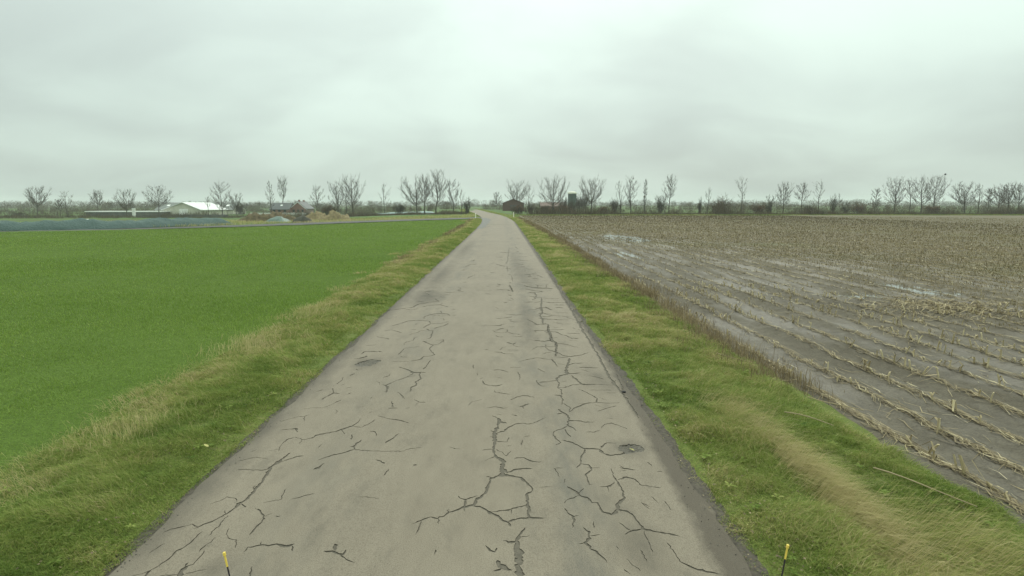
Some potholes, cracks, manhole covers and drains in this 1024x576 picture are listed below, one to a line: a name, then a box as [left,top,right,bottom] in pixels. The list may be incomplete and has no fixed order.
pothole [618,444,644,454]
pothole [355,359,381,367]
crack [134,260,474,576]
crack [413,238,717,576]
